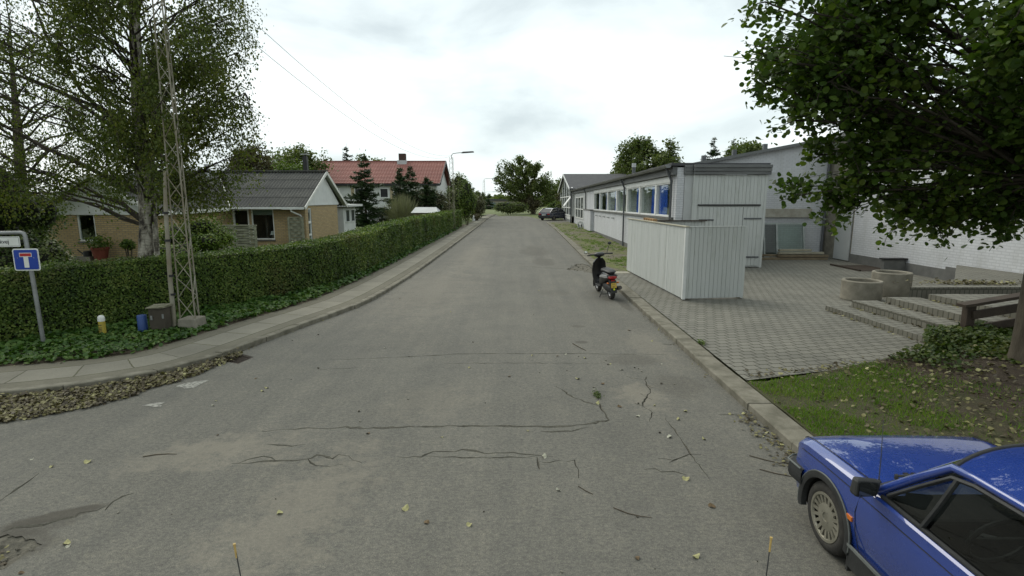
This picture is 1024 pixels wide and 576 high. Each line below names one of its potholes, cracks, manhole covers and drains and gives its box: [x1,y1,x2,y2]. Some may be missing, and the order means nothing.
crack [629,377,709,478]
crack [232,386,609,467]
pothole [0,534,42,570]
crack [3,473,133,532]
crack [401,449,579,478]
